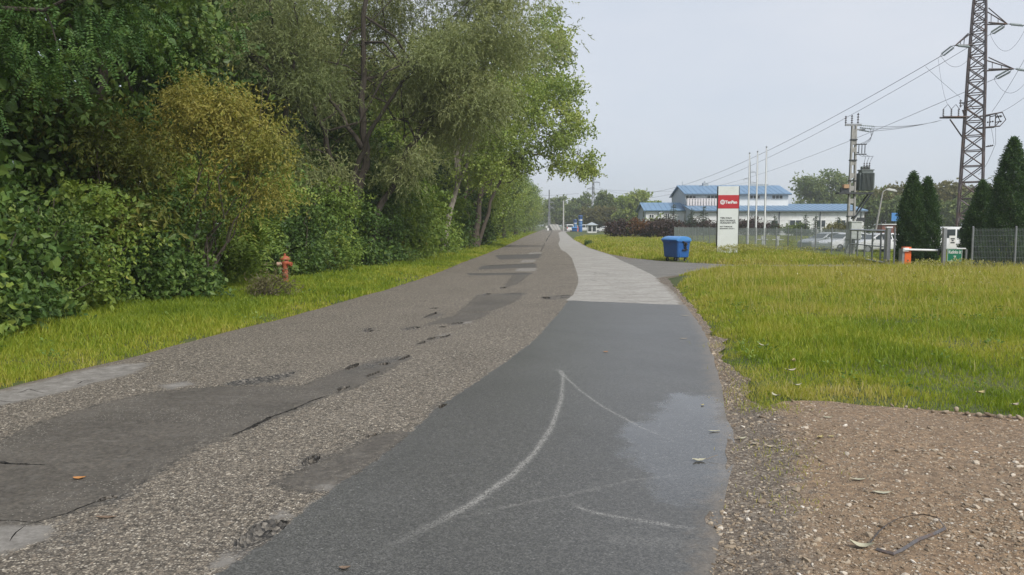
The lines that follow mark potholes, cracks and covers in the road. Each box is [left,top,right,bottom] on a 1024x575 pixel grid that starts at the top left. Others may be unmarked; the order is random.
pothole [301,454,321,466]
crack [2,502,94,540]
pothole [233,519,290,548]
